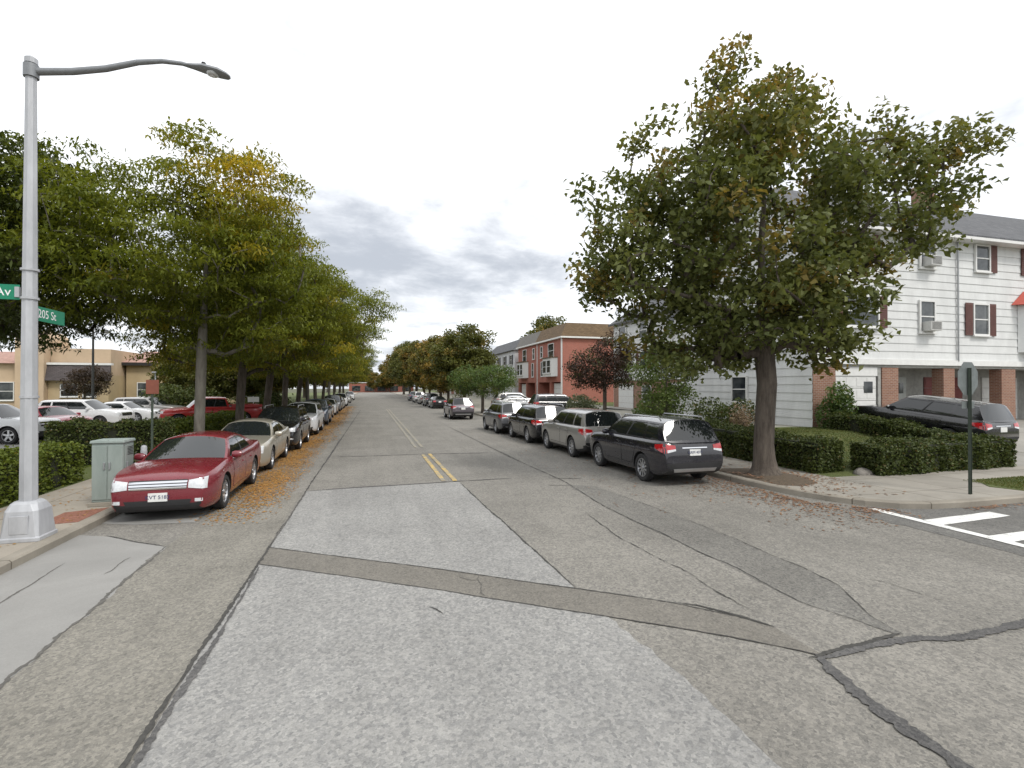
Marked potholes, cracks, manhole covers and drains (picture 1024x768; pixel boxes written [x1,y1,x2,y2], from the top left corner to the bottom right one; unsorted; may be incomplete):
crack [260,427,946,654]
